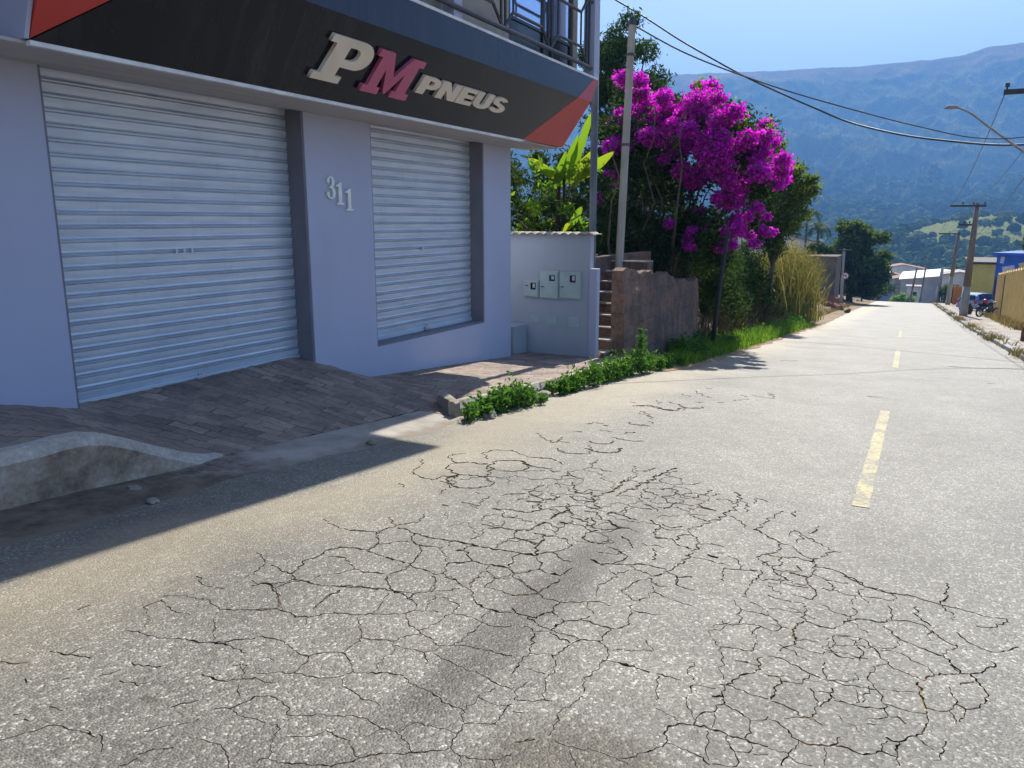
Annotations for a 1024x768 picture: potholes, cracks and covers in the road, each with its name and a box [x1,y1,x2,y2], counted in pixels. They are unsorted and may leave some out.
crack [398,388,776,494]
crack [127,462,768,768]
crack [50,647,161,686]
crack [0,706,103,752]
